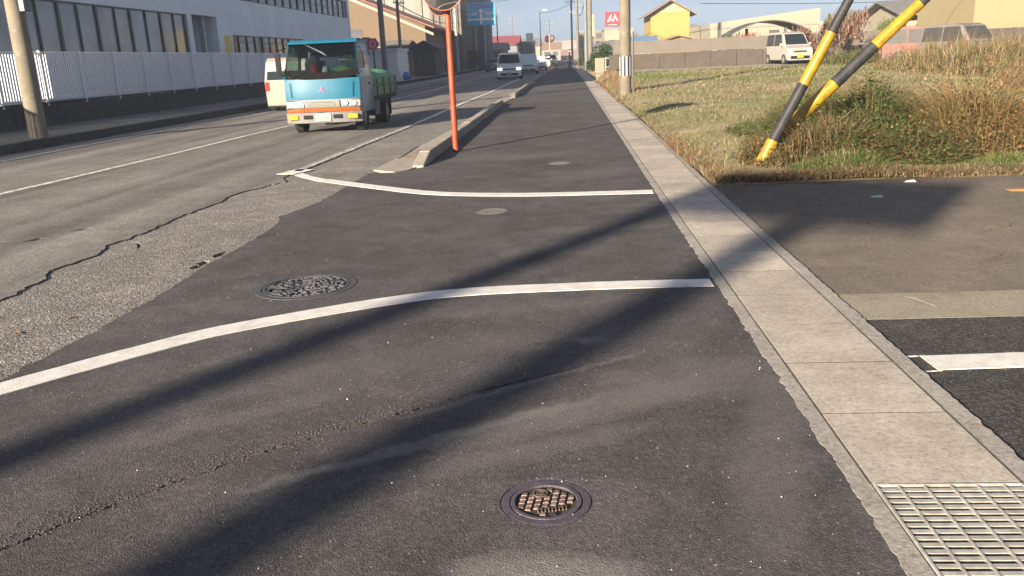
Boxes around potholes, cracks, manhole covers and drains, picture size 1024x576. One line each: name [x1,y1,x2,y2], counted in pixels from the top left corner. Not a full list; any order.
manhole cover [501,479,591,526]
drain grate [873,482,1024,576]
manhole cover [254,273,357,300]
